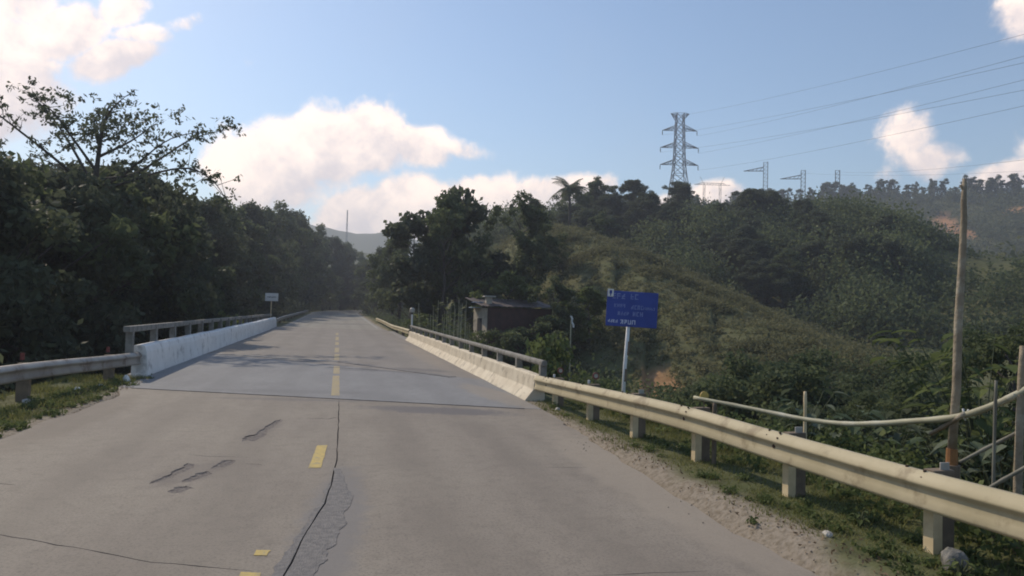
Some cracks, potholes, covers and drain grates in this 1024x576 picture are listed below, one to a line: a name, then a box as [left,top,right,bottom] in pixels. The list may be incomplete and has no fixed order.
pothole [242,419,282,441]
pothole [182,471,213,482]
crack [283,404,339,576]
pothole [210,460,236,469]
pothole [150,463,195,484]
crack [3,535,249,571]
